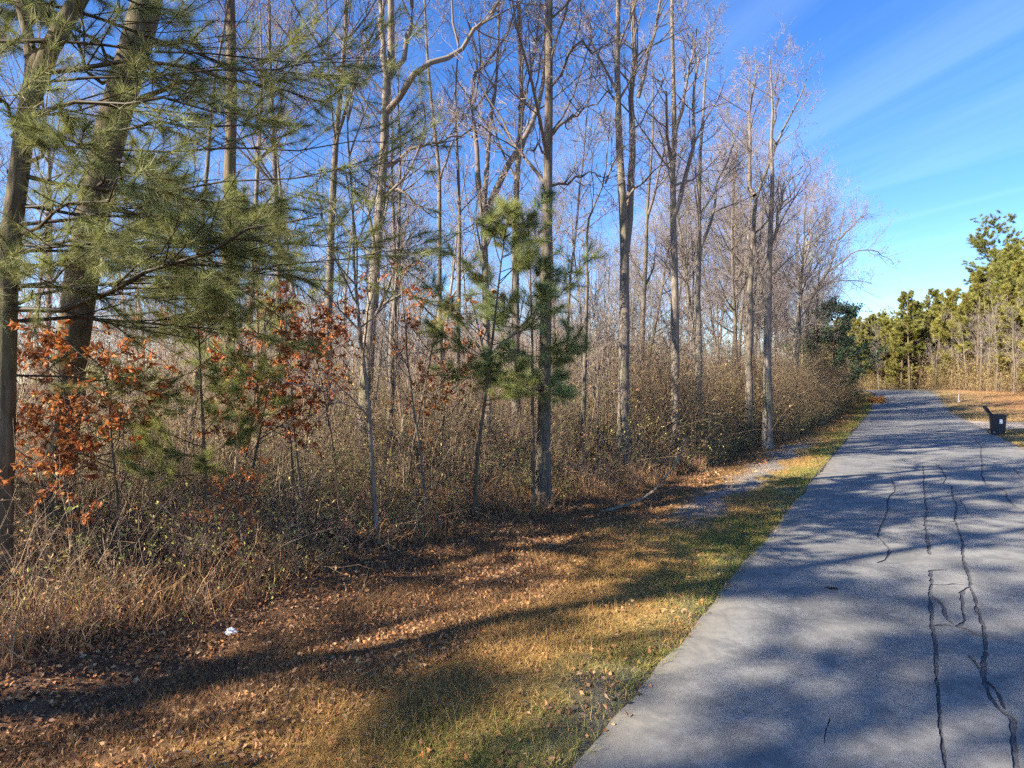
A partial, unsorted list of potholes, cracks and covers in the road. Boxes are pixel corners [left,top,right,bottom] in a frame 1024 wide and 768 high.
crack [877,481,896,563]
crack [922,438,1024,768]
